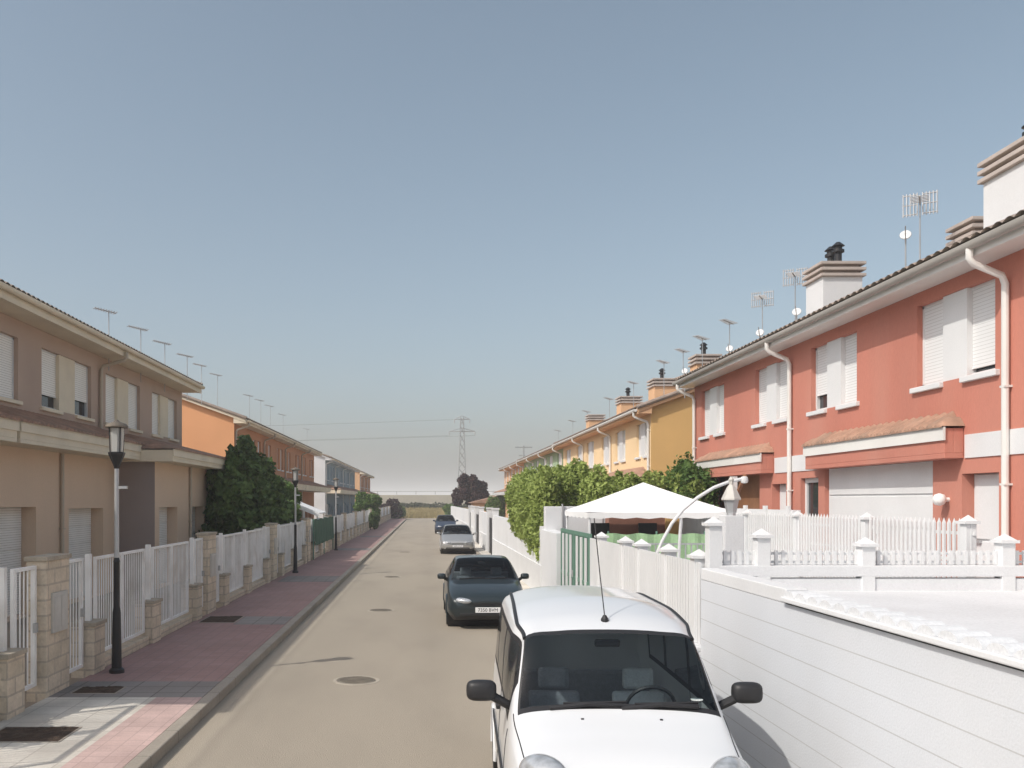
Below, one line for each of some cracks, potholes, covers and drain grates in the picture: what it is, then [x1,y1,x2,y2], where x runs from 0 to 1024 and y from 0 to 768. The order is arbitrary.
manhole cover [333,676,380,685]
